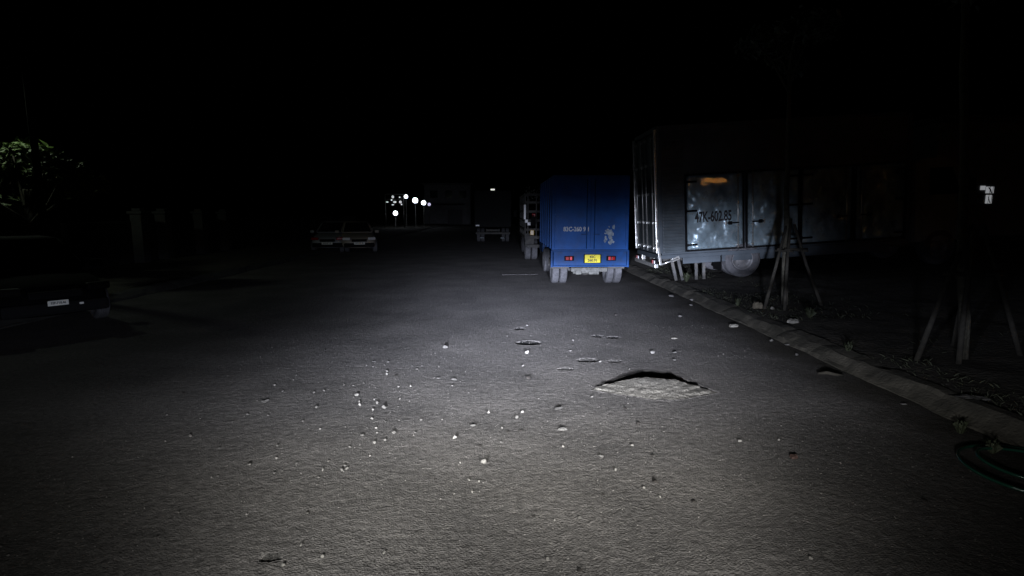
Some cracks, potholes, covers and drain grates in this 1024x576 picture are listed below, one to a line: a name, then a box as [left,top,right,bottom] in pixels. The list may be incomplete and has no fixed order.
pothole [591,373,718,402]
